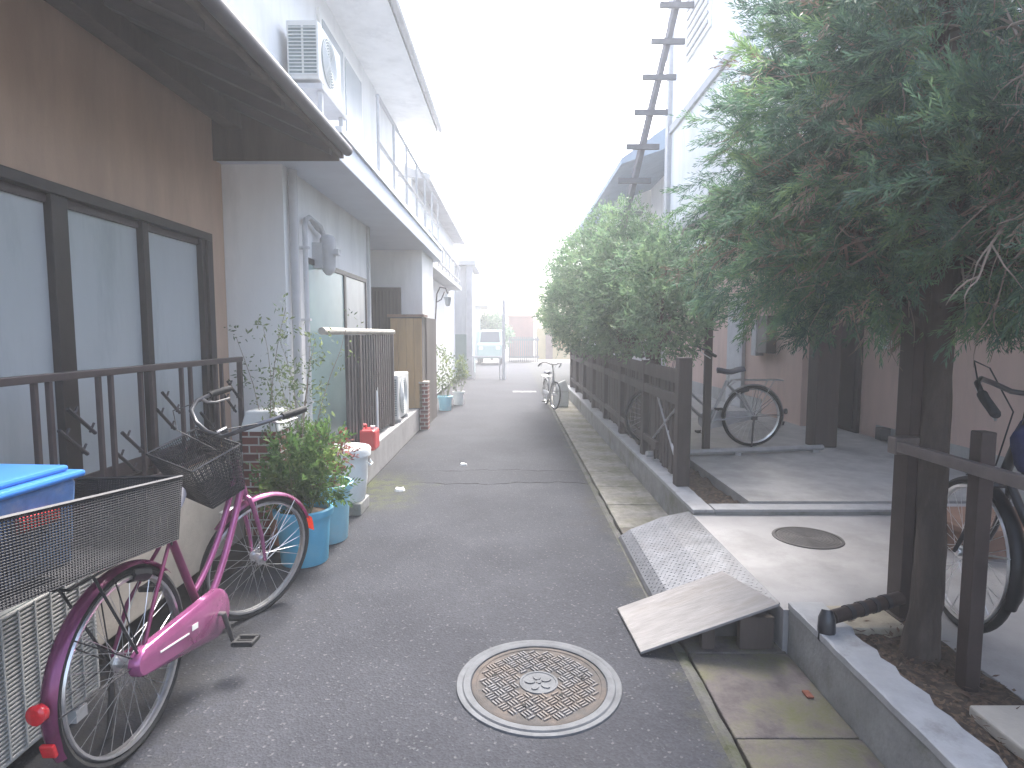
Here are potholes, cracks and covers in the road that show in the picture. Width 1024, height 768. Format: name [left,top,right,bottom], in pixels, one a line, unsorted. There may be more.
manhole cover [456,640,623,739]
crack [422,469,584,485]
manhole cover [772,526,845,550]
